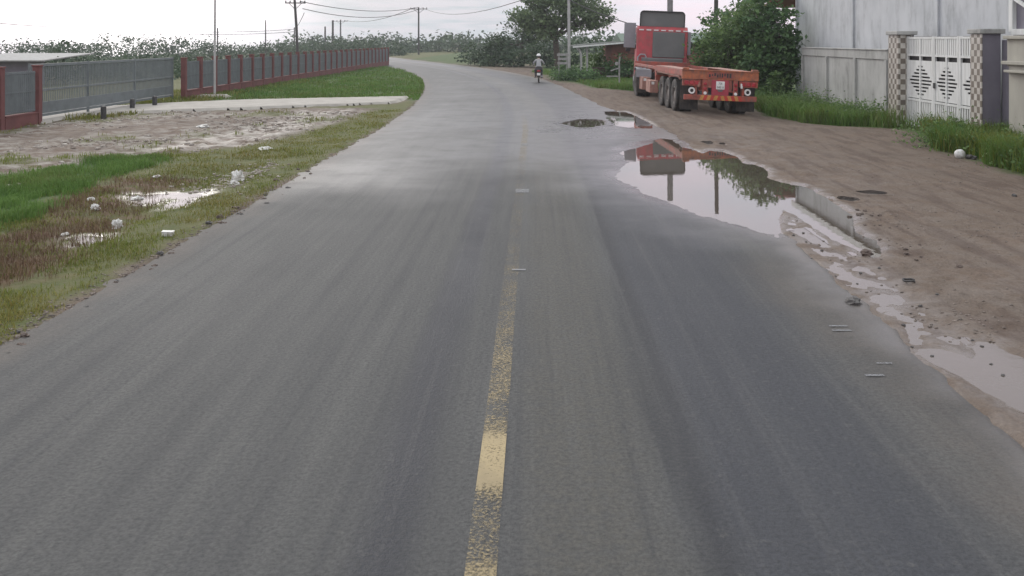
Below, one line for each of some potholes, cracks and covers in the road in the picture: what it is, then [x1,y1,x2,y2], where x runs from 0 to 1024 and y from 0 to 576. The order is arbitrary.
pothole [554,119,612,128]
pothole [828,195,868,203]
pothole [847,188,896,196]
